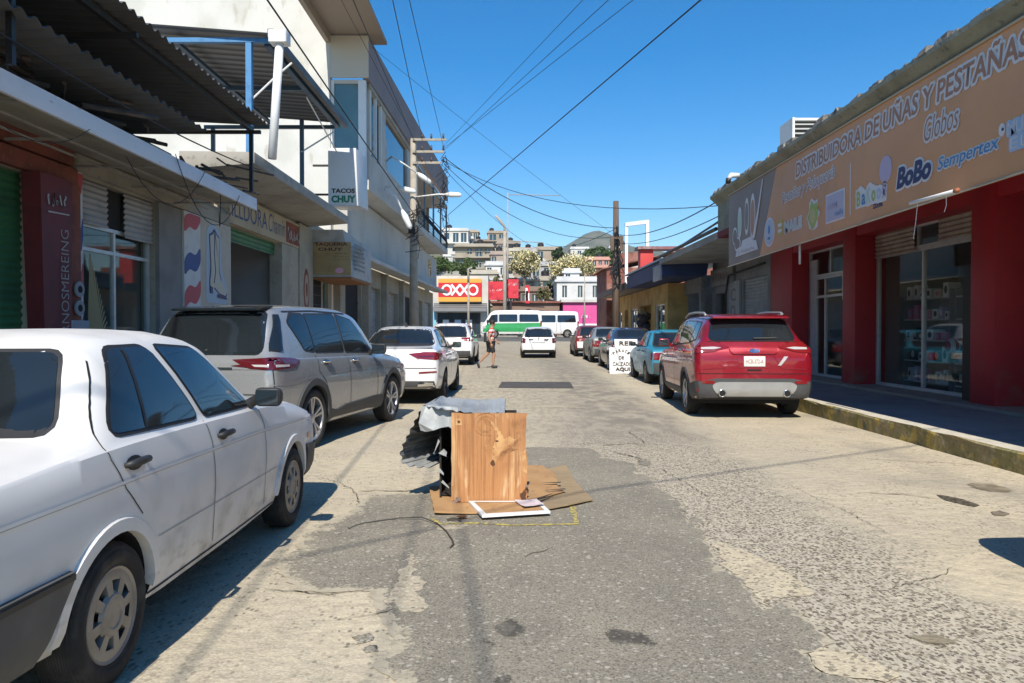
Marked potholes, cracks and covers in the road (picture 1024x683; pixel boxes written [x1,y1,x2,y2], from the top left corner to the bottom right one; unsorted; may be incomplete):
pothole [968,483,1012,492]
pothole [936,494,979,507]
